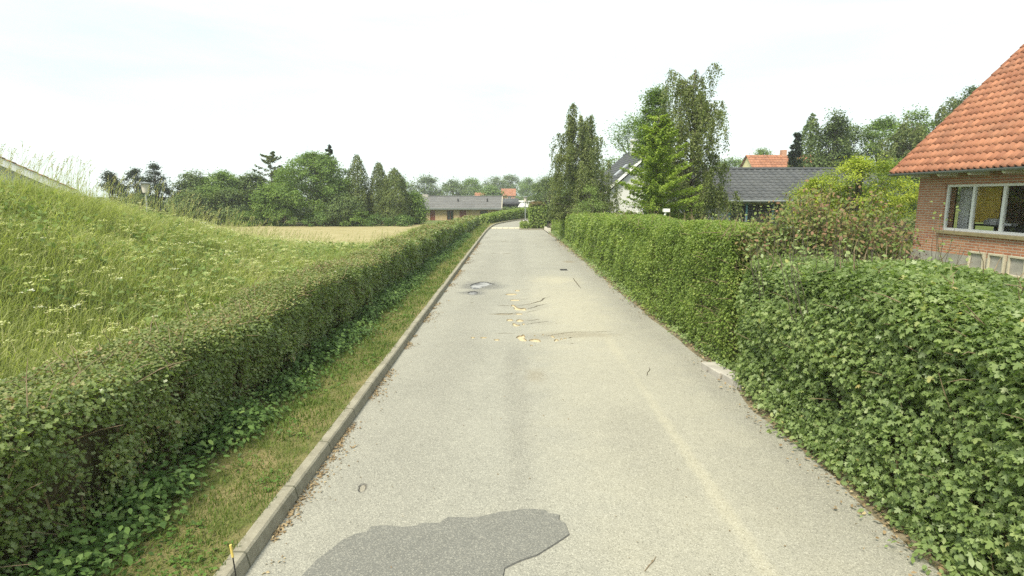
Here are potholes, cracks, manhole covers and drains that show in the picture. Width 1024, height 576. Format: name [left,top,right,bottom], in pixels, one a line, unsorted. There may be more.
crack [496,289,606,344]
